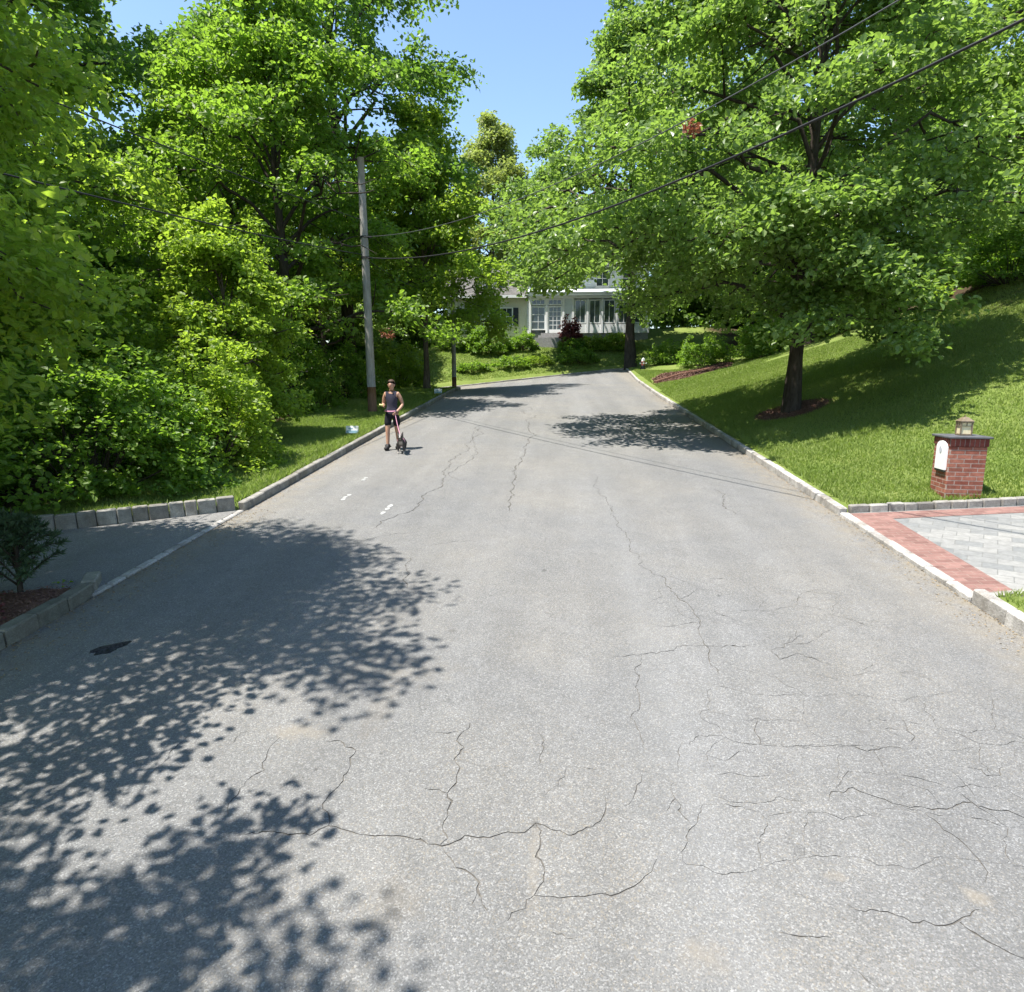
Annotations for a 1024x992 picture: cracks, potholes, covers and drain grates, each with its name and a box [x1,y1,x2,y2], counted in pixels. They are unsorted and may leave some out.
crack [848,904,1024,959]
crack [667,668,1024,883]
crack [363,427,484,541]
crack [593,477,863,744]
crack [237,724,657,921]
pothole [90,641,132,656]
crack [227,738,279,811]
